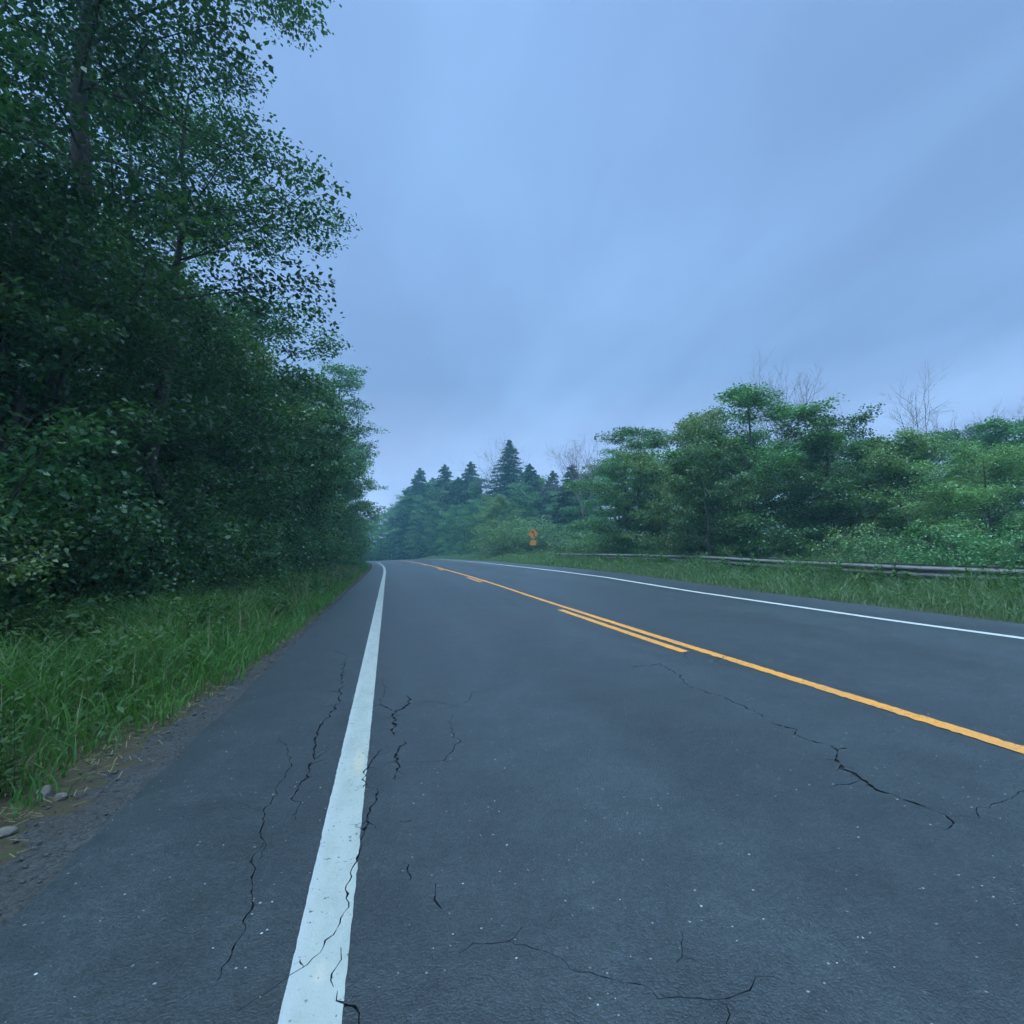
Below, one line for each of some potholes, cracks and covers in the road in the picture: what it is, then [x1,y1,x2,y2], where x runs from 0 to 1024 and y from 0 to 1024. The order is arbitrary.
crack [469,928,756,1023]
crack [219,666,345,978]
crack [641,665,1024,829]
crack [324,687,471,1024]
